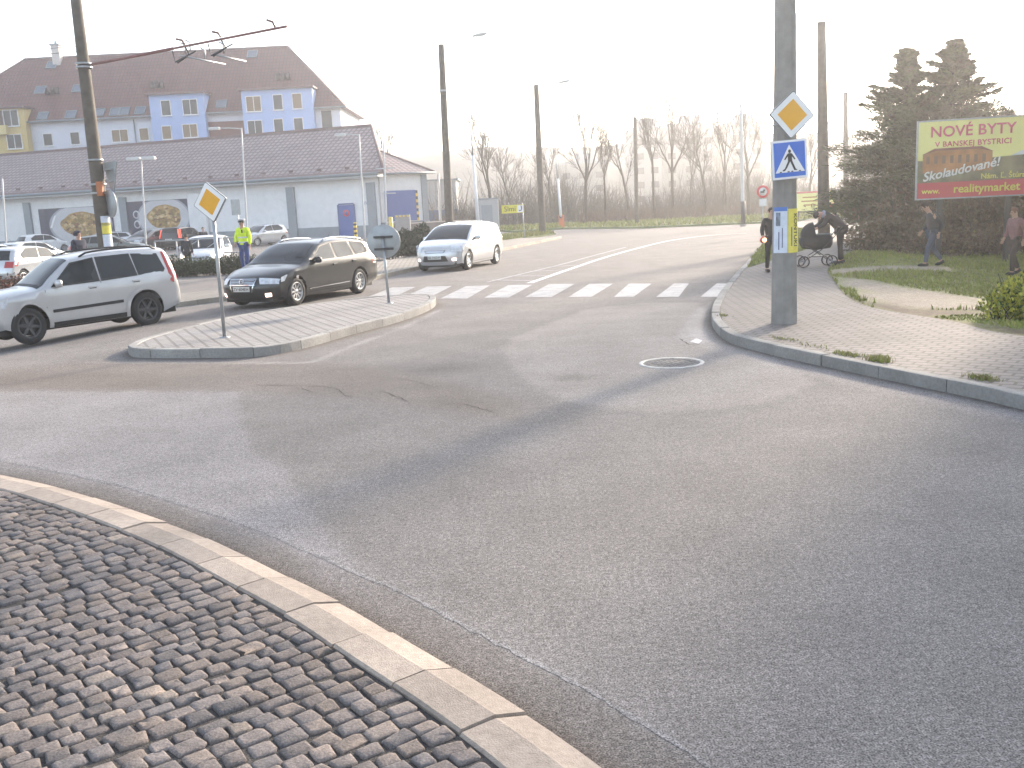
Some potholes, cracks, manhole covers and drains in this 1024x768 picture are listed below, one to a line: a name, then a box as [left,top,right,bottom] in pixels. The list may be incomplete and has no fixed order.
manhole cover [639,357,704,369]
